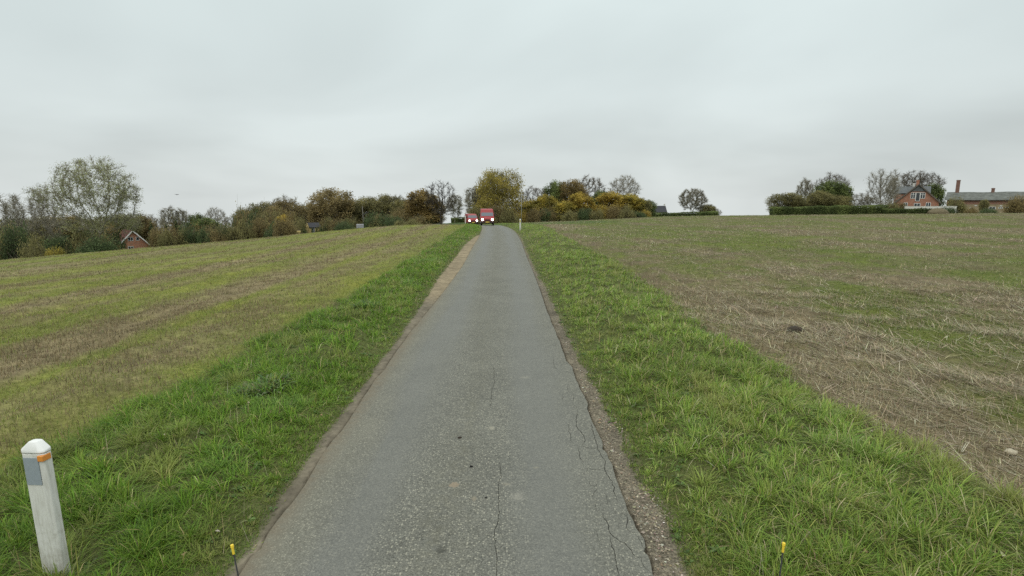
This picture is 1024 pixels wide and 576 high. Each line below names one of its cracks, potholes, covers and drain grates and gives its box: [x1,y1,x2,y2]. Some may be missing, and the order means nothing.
crack [562,388,645,576]
crack [493,463,502,576]
